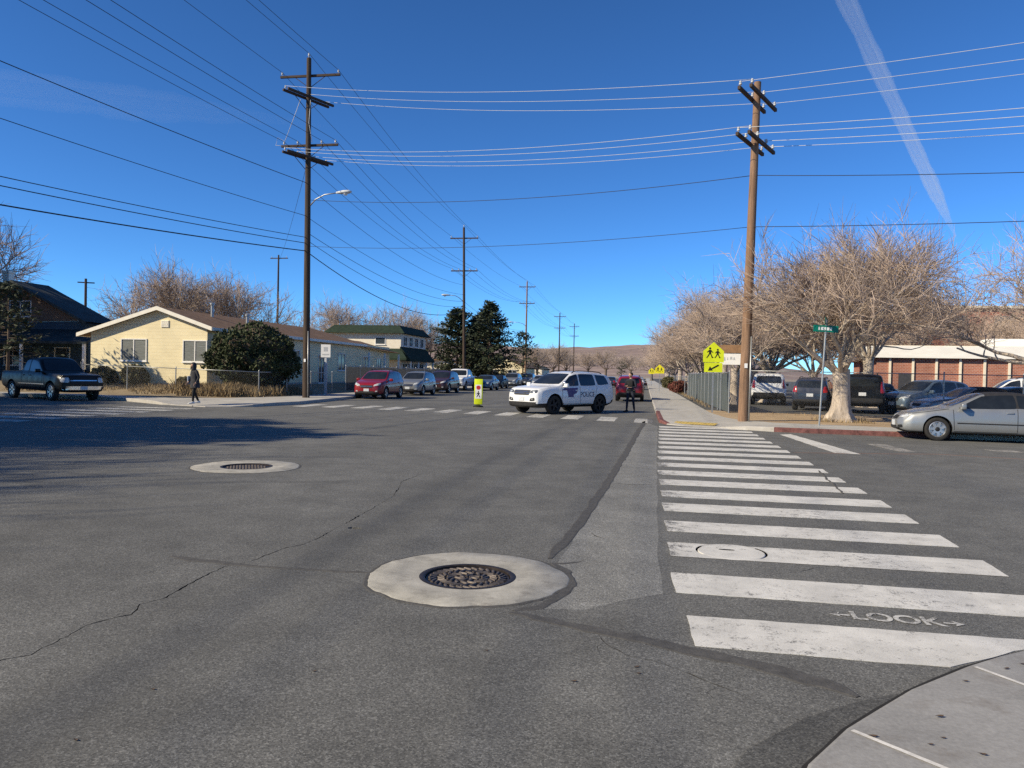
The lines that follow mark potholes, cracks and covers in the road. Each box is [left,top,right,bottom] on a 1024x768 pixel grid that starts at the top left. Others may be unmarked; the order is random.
crack [0,475,418,661]
manhole cover [188,460,301,474]
manhole cover [698,544,766,561]
manhole cover [362,552,573,609]
